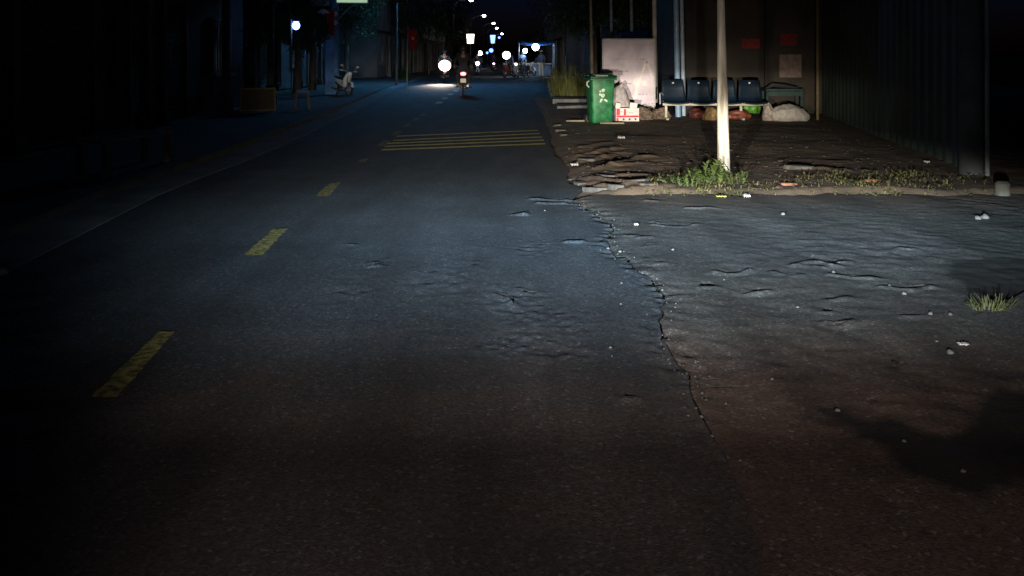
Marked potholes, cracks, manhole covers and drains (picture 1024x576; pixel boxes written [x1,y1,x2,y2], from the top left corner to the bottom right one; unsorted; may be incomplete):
crack [780,259,925,288]
crack [543,198,763,558]
